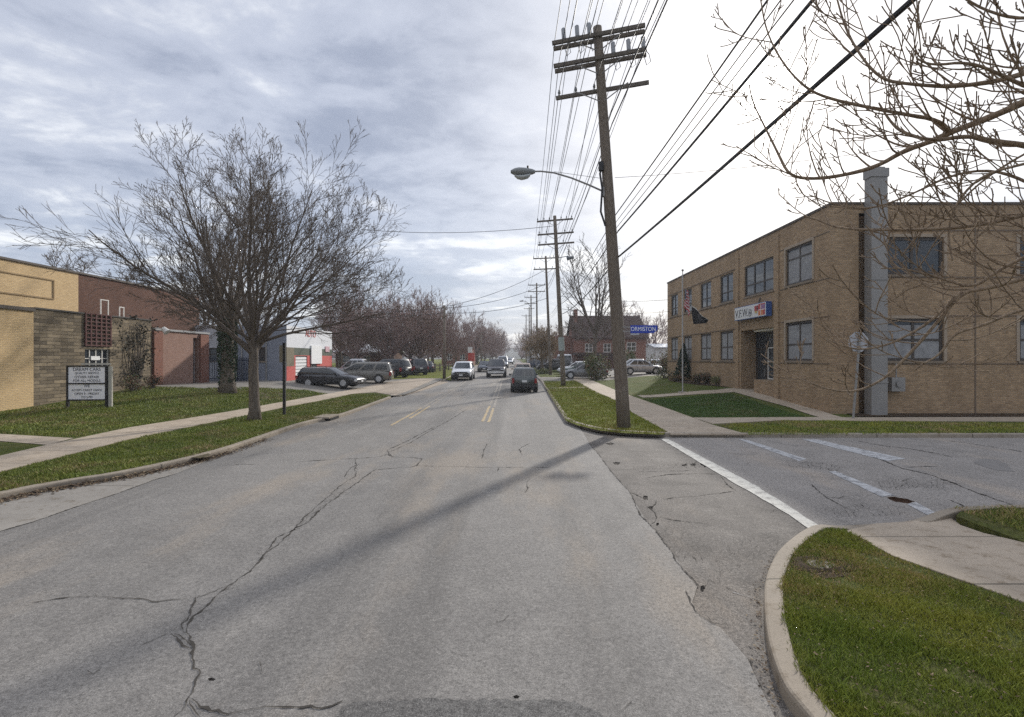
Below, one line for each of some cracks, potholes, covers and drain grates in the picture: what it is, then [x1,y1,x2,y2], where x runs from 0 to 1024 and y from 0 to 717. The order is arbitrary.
crack [36,410,465,717]
crack [861,440,1022,507]
crack [788,462,852,510]
crack [630,461,733,565]
